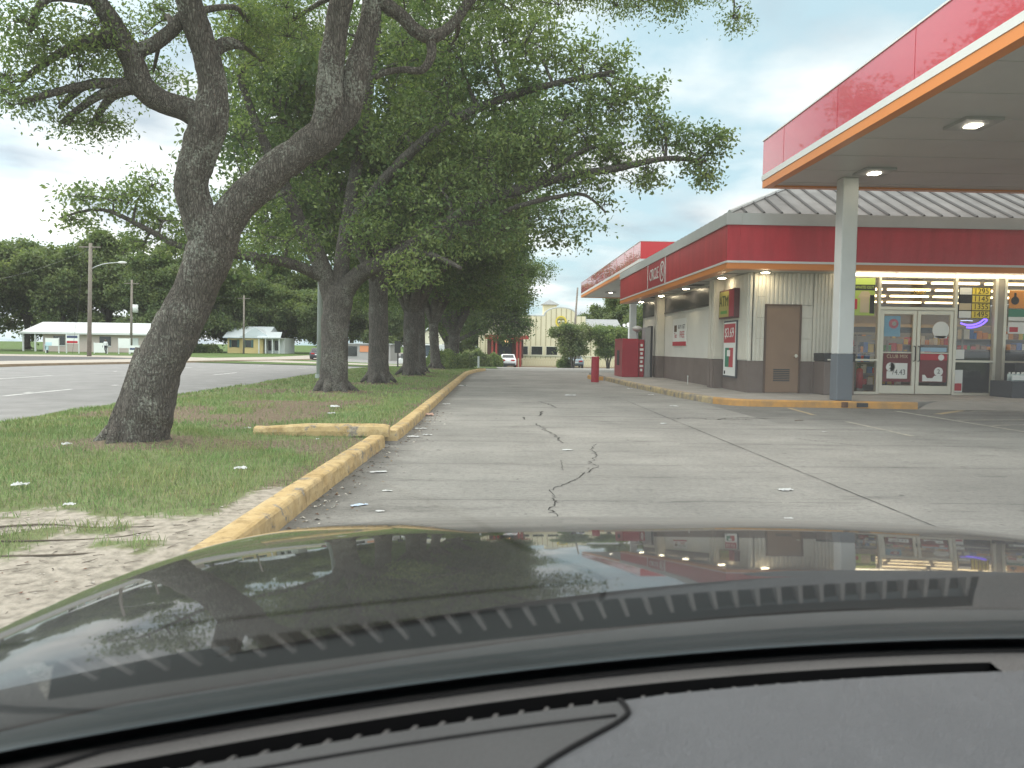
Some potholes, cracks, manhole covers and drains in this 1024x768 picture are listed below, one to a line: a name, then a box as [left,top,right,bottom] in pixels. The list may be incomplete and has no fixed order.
crack [548,444,598,516]
